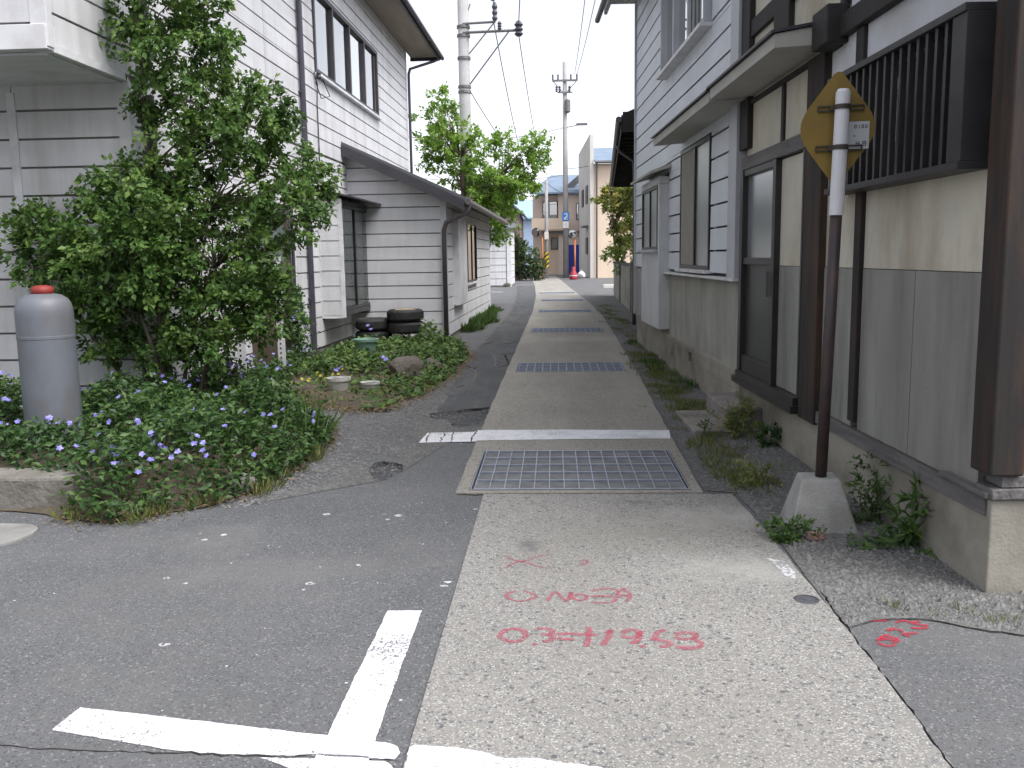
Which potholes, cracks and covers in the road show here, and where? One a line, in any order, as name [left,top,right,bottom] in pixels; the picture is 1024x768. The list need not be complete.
crack [0,744,397,761]
manhole cover [793,594,820,604]
drain grate [470,450,691,490]
drain grate [516,362,627,372]
